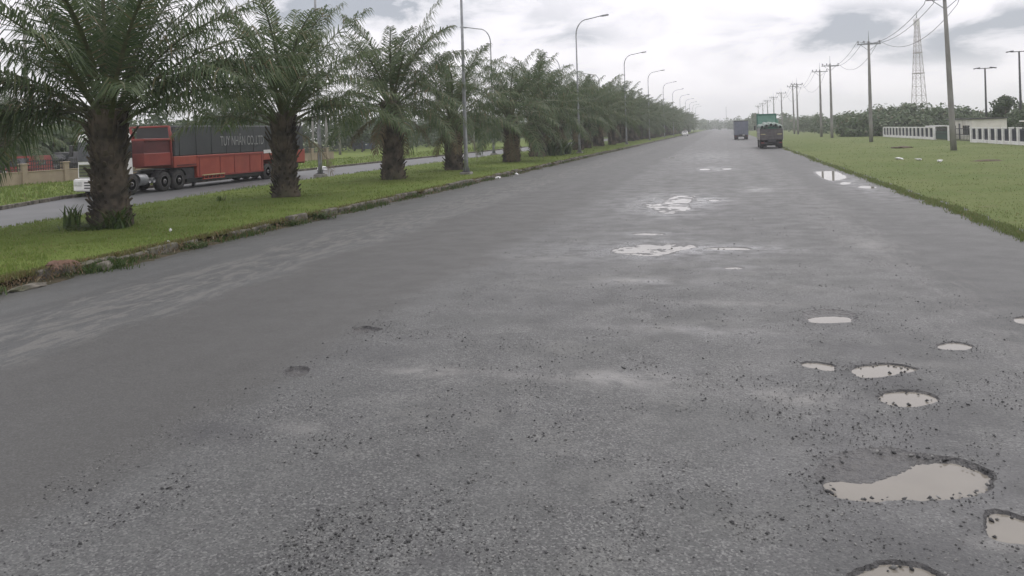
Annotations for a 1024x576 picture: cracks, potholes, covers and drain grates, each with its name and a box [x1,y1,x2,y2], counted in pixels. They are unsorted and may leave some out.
pothole [800,361,837,371]
pothole [813,170,850,181]
pothole [935,341,974,350]
pothole [849,363,920,378]
pothole [282,366,310,377]
pothole [801,309,859,323]
pothole [610,243,698,256]
pothole [876,389,940,407]
pothole [983,508,1024,545]
pothole [846,559,945,576]
pothole [815,446,998,503]
pothole [639,195,700,214]
